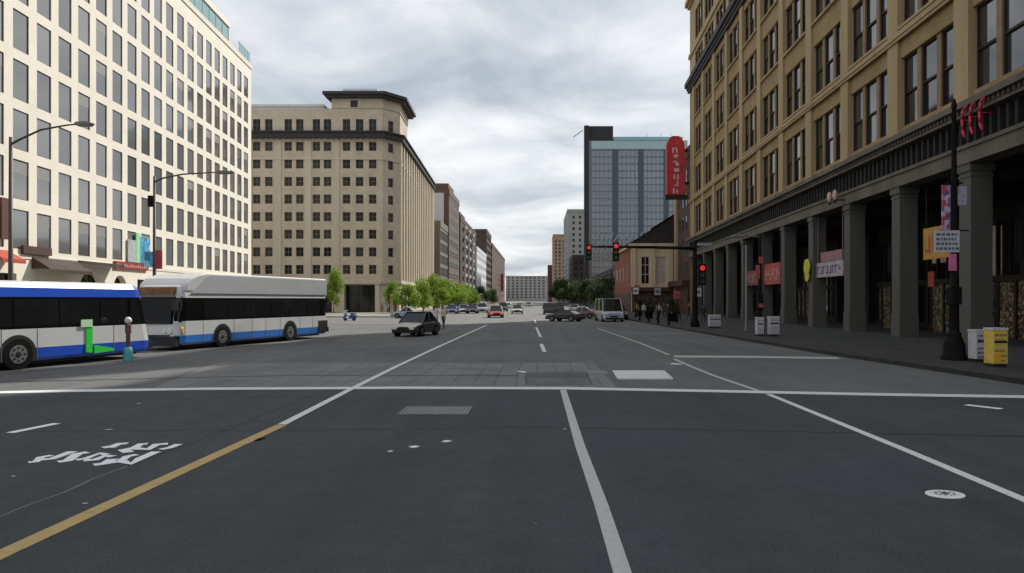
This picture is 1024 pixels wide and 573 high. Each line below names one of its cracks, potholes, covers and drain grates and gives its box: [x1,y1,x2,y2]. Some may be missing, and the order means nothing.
drain grate [397,406,473,415]
